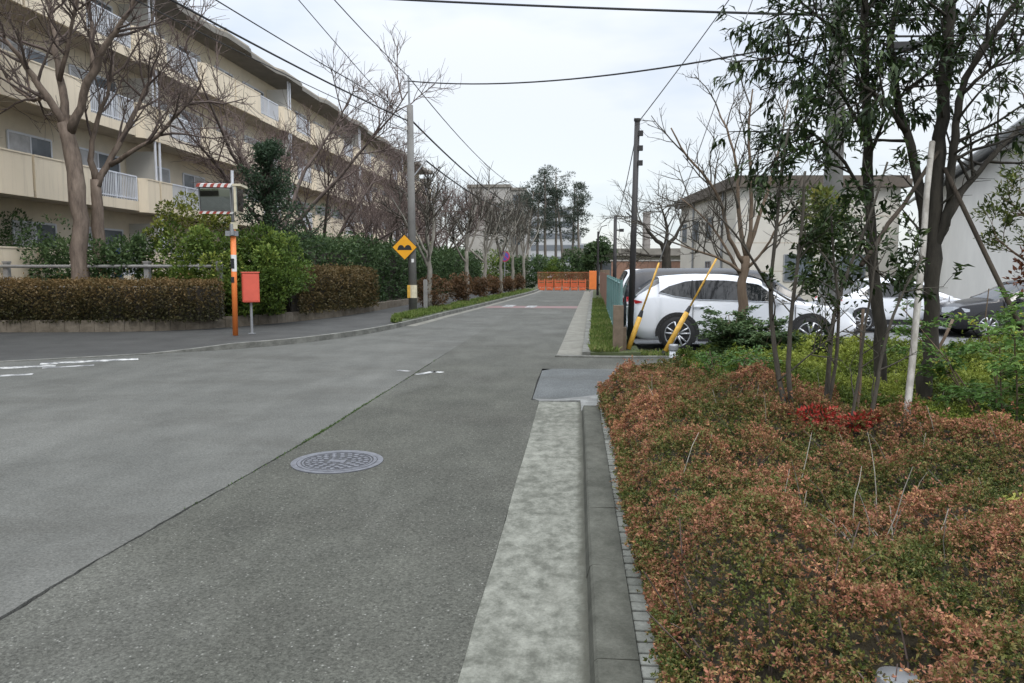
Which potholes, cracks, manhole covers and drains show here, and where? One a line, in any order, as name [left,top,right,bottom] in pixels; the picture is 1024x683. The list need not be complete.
manhole cover [290,450,383,474]
